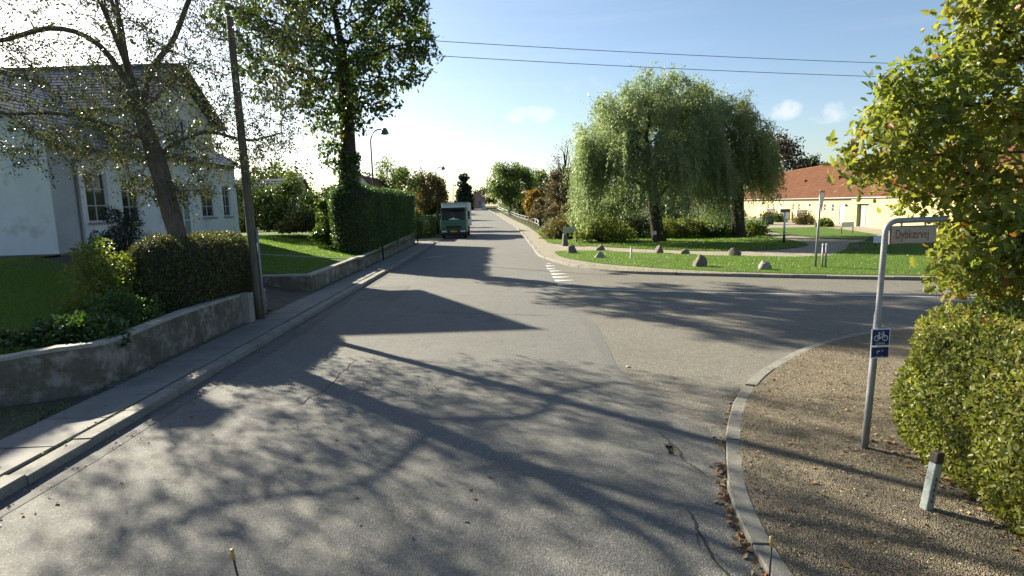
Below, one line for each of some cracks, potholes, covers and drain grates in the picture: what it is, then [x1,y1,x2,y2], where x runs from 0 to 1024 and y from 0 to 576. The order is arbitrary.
crack [688,510,730,576]
crack [658,431,707,477]
crack [280,362,353,407]
